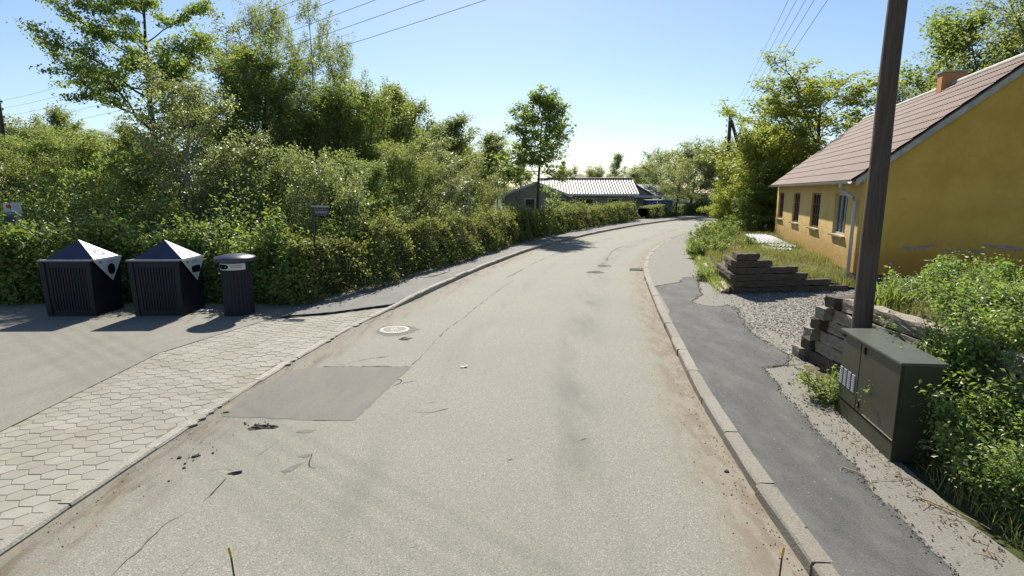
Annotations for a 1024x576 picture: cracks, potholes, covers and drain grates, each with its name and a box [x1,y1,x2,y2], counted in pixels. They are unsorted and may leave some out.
crack [111,512,186,575]
manhole cover [380,326,409,334]
